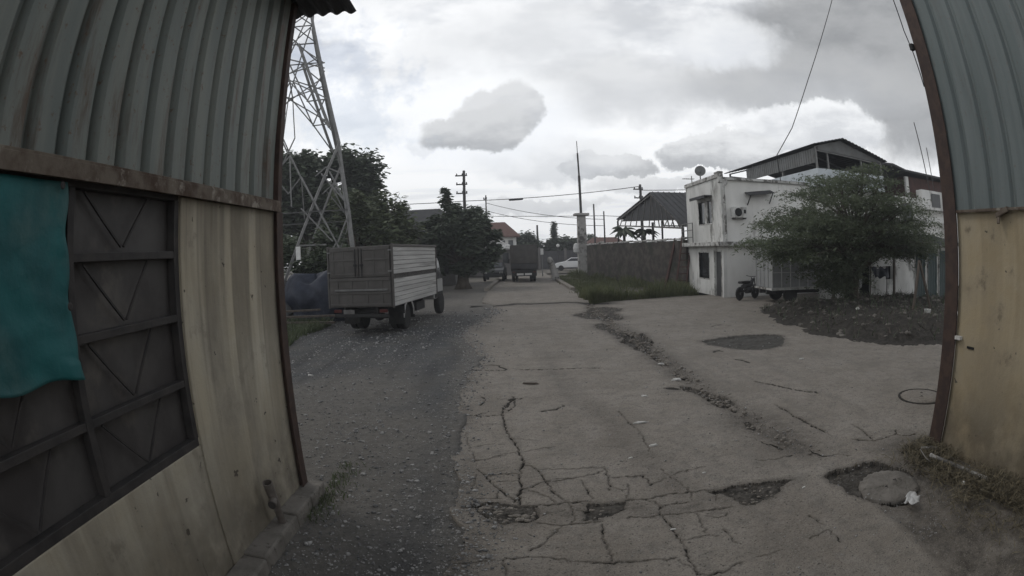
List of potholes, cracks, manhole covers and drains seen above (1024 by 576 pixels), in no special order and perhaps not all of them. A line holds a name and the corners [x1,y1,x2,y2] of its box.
crack [504,469,667,567]
crack [470,397,568,505]
crack [759,382,833,457]
pothole [465,502,538,525]
pothole [709,479,791,506]
pothole [584,501,626,521]
manhole cover [858,470,919,506]
crack [664,519,741,576]
